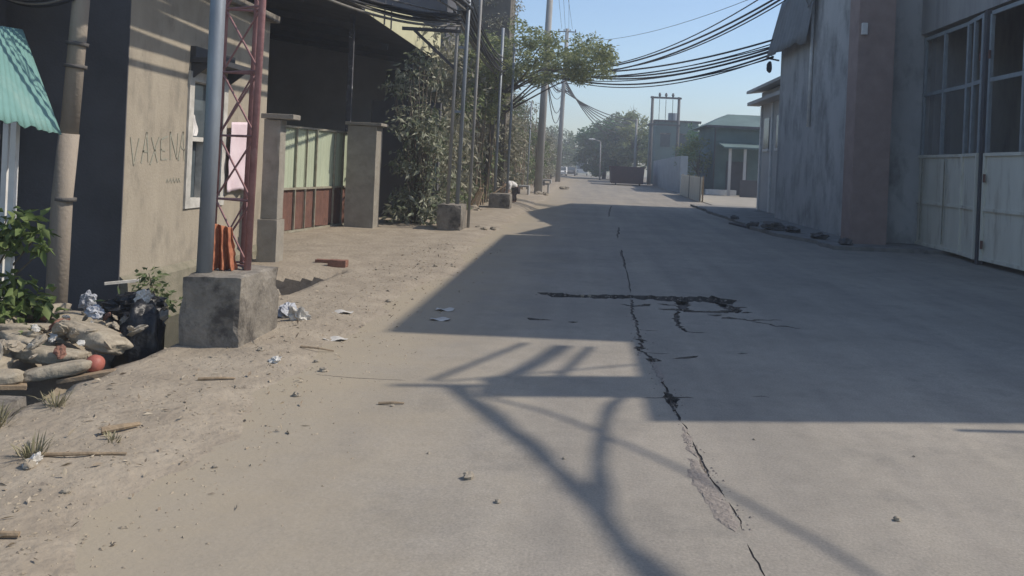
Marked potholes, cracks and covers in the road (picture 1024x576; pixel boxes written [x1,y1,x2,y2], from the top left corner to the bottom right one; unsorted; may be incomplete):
crack [536,206,799,576]
